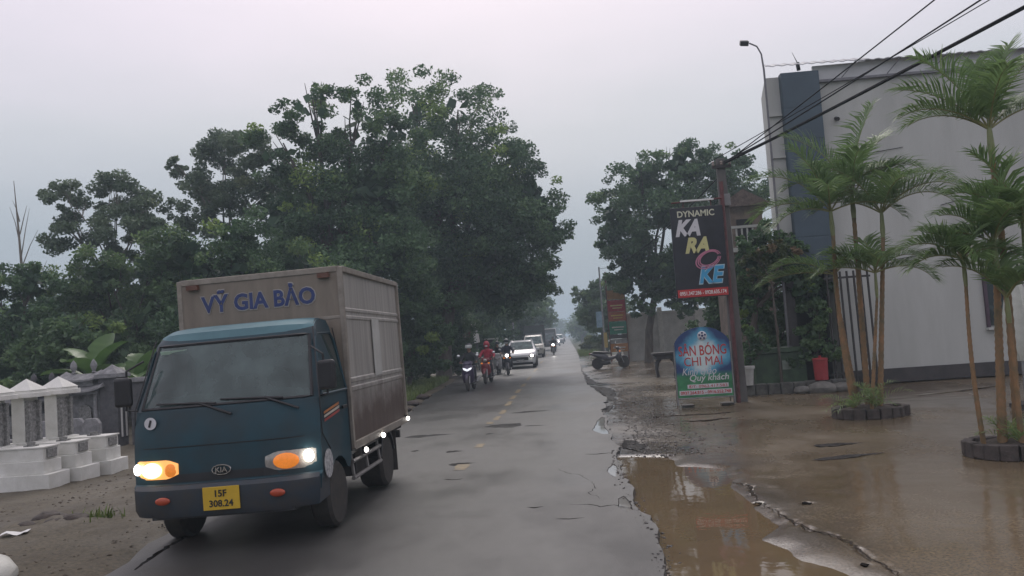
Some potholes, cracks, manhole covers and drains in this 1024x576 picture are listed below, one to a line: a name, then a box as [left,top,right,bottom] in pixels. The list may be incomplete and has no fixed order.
crack [732,482,899,576]
crack [559,469,629,519]
pothole [592,417,610,434]
pothole [814,452,884,460]
pothole [618,496,633,512]
